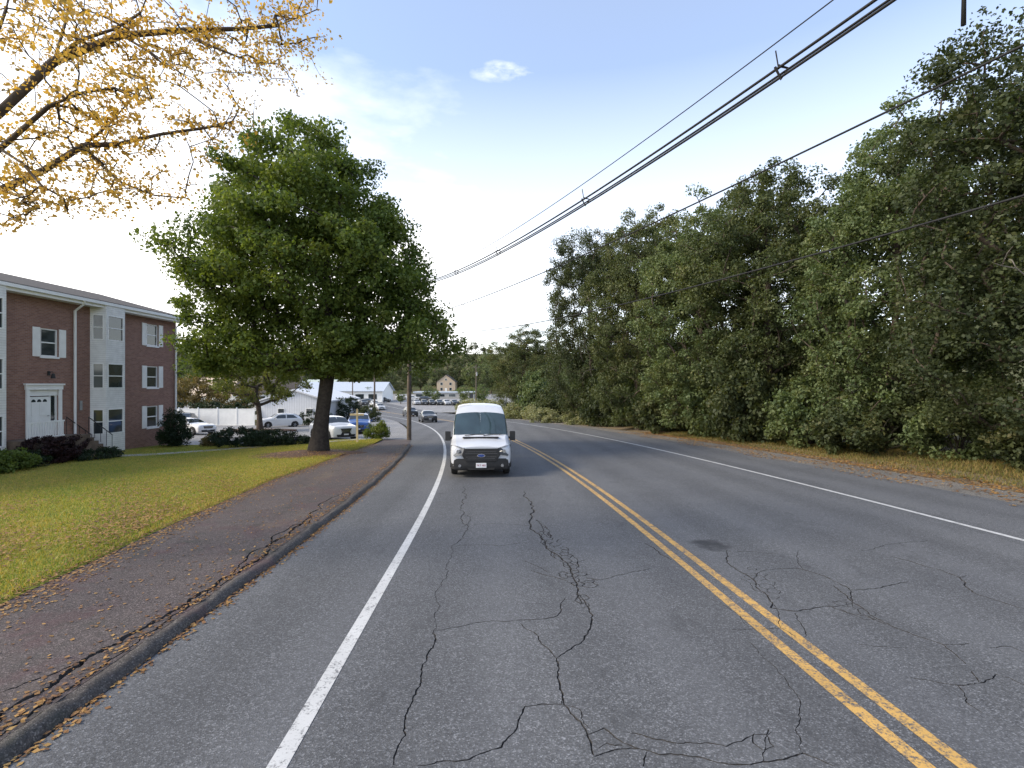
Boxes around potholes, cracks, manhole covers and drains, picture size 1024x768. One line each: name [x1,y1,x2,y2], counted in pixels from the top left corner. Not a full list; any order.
crack [393,489,834,766]
crack [704,550,1023,712]
